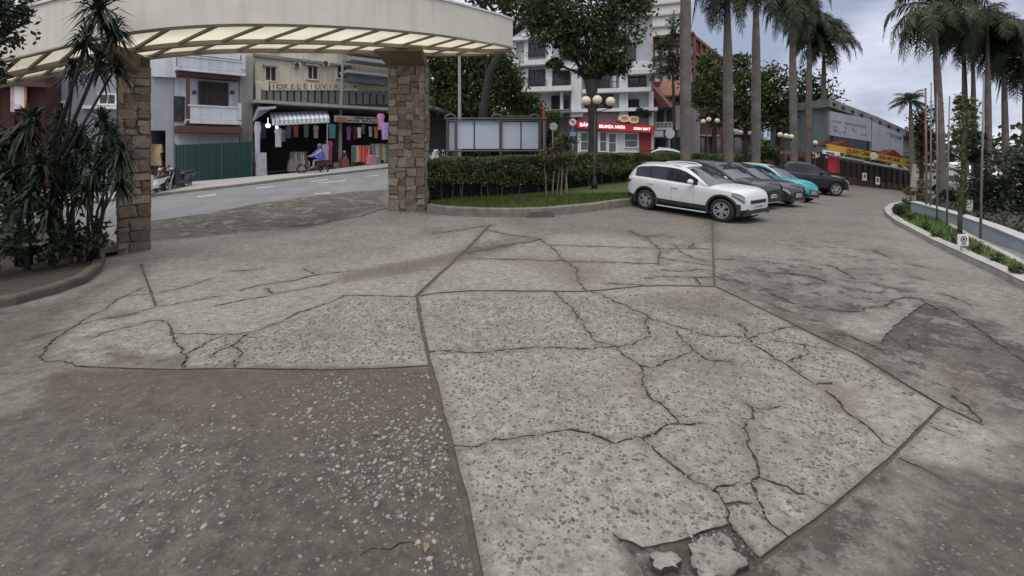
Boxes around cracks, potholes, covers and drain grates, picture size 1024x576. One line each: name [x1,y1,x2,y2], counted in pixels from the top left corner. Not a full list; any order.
crack [429,231,941,551]
crack [31,269,415,369]
crack [927,395,982,436]
pothole [612,523,761,576]
crack [360,541,415,556]
crack [943,294,1024,363]
